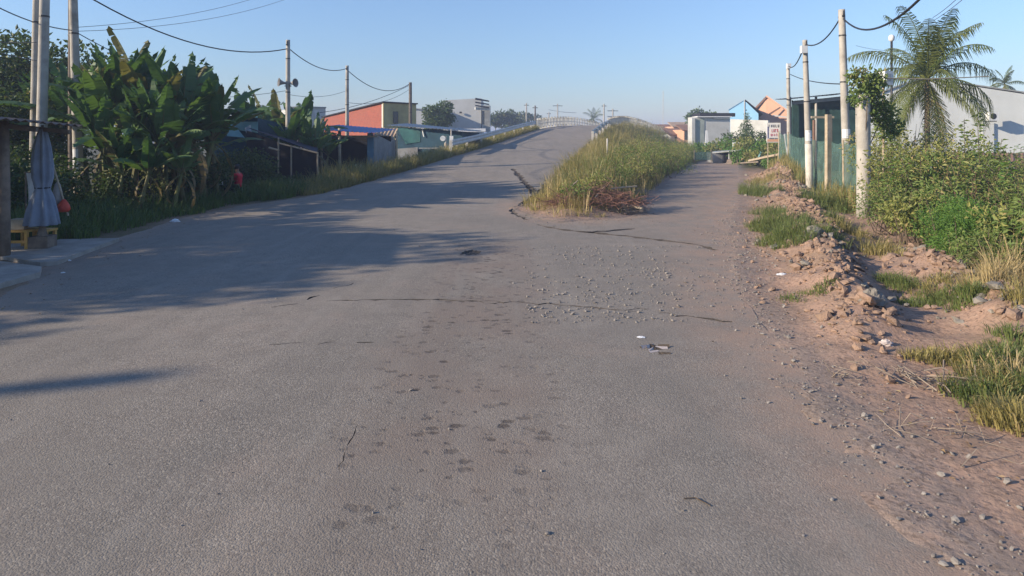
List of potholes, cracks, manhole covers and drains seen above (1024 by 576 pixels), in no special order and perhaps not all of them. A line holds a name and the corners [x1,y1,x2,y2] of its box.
crack [275,283,732,322]
crack [509,169,717,250]
